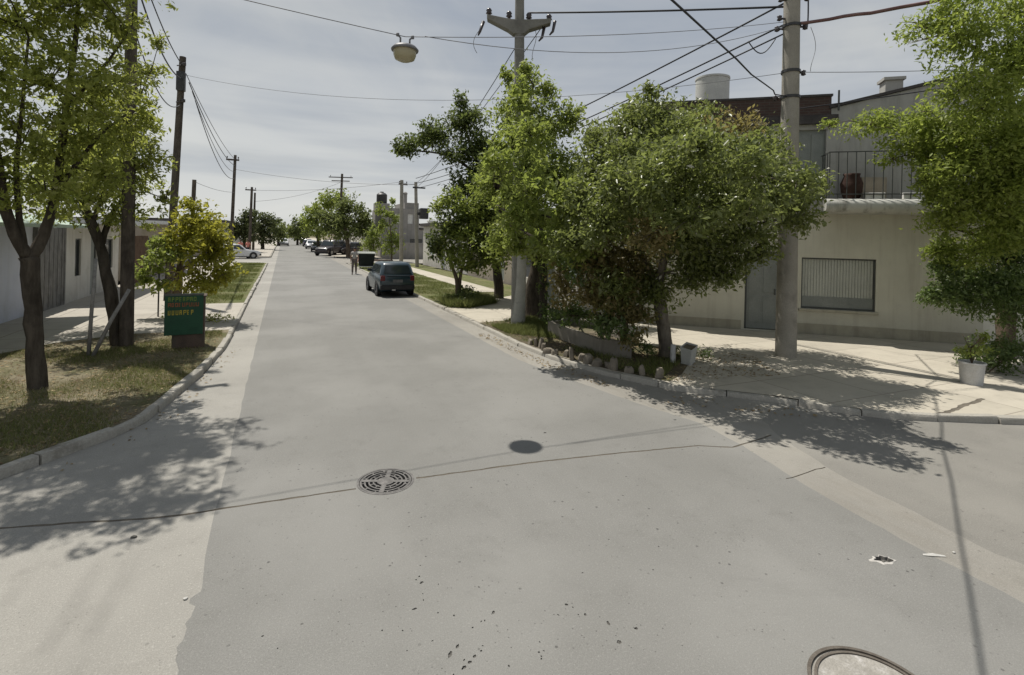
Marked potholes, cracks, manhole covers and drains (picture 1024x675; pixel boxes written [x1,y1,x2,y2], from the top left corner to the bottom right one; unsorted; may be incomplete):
pothole [869,555,897,565]
manhole cover [807,646,914,675]
